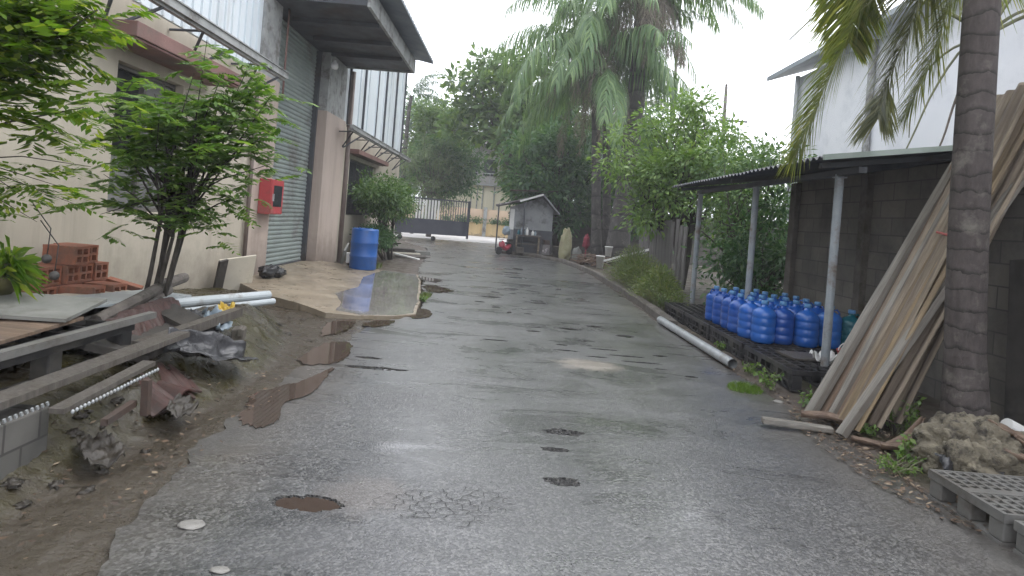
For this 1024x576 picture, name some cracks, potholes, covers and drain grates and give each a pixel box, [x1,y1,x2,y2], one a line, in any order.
crack [370,487,515,527]
pothole [271,494,345,512]
pothole [543,428,585,436]
pothole [543,477,581,487]
